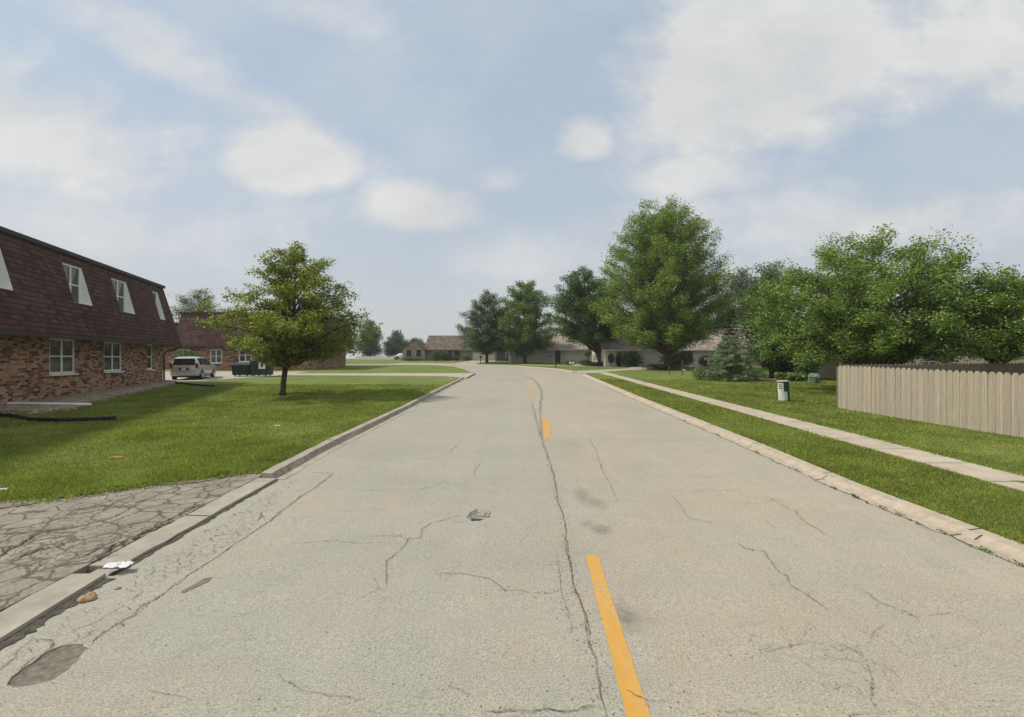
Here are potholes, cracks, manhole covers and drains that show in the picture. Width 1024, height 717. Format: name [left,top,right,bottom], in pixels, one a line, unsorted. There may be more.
pothole [467,509,492,520]
crack [736,542,832,611]
crack [737,586,970,713]
crack [313,516,457,599]
crack [478,704,601,712]
